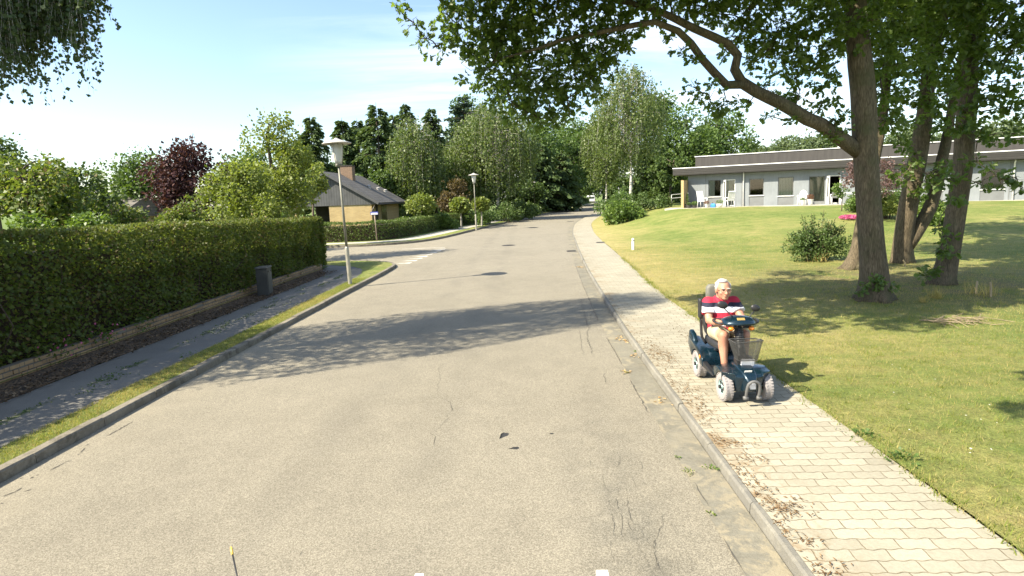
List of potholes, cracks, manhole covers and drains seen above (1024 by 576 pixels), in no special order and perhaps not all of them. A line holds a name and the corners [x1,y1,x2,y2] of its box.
crack [540,449,703,573]
